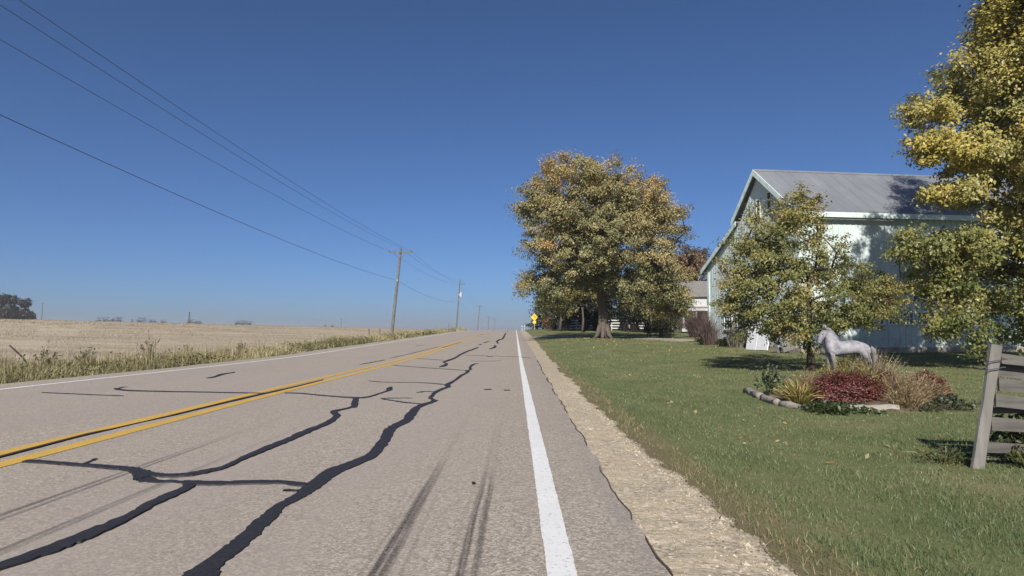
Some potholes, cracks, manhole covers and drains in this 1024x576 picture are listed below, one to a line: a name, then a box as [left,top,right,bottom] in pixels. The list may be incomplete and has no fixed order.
crack [41,372,261,396]
